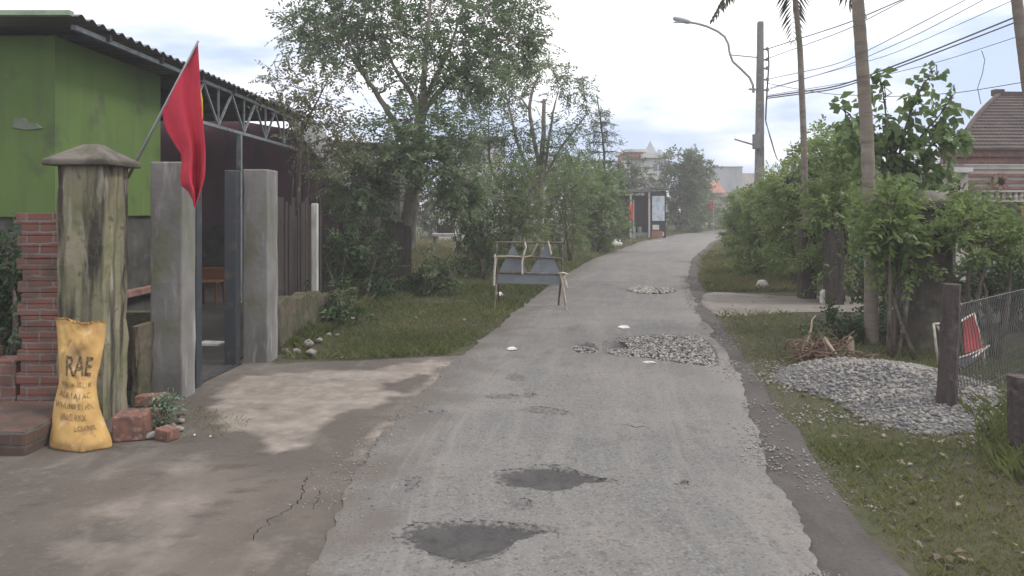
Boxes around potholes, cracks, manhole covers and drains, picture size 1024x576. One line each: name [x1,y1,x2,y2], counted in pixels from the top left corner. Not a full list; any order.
pothole [573,342,599,354]
crack [253,473,320,540]
pothole [602,333,720,367]
pothole [474,462,629,493]
pothole [374,518,575,575]
pothole [625,285,677,294]
pothole [505,373,526,382]
pothole [514,405,578,416]
